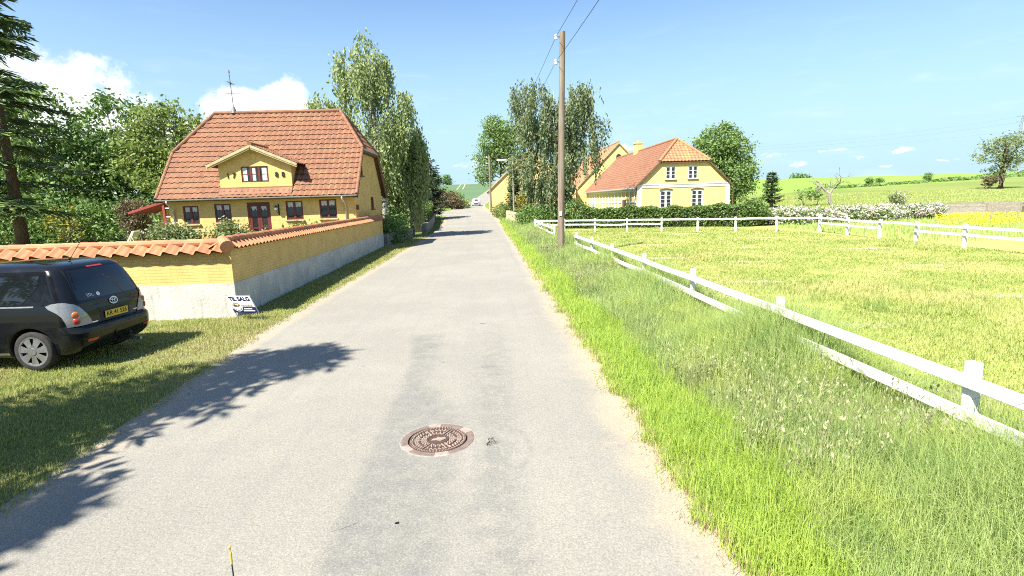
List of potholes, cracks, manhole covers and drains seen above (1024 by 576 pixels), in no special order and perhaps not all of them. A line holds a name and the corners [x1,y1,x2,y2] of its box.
manhole cover [399,423,476,457]
